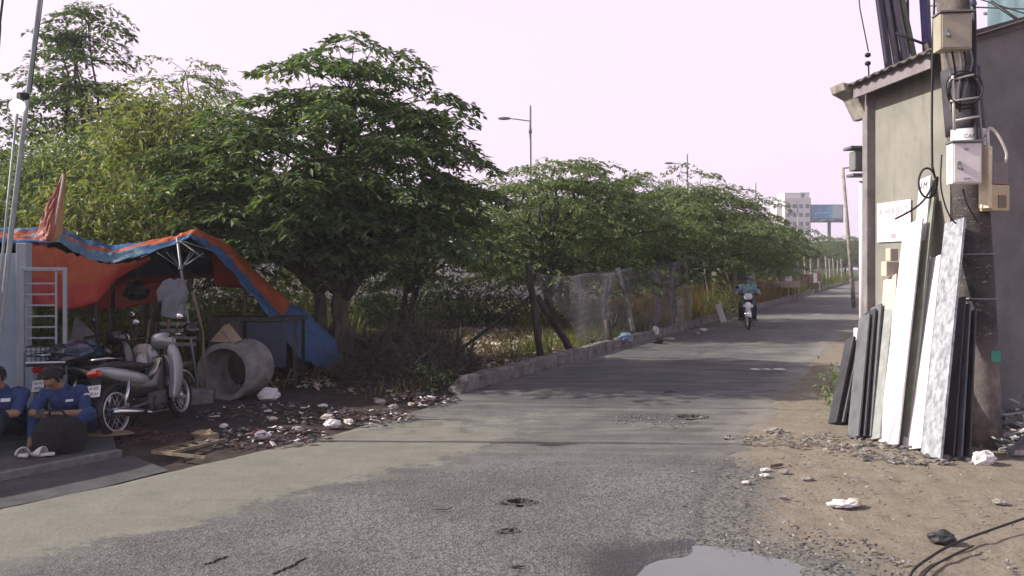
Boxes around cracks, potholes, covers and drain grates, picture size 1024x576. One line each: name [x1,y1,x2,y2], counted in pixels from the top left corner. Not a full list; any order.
crack [272,557,307,575]
pothole [502,497,539,507]
